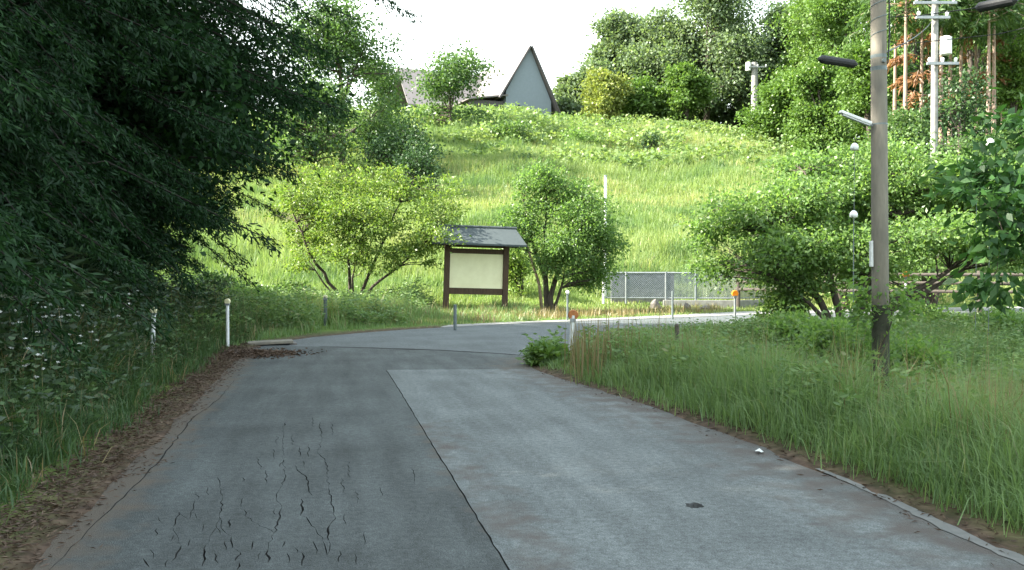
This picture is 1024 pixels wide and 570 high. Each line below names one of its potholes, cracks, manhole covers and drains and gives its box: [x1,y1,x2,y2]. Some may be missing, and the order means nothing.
crack [50,381,415,569]
